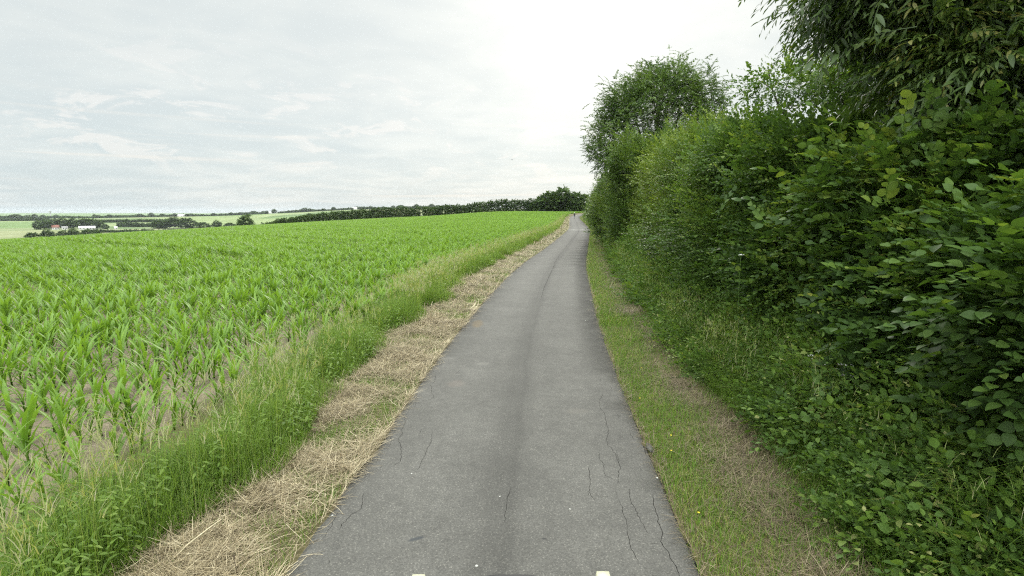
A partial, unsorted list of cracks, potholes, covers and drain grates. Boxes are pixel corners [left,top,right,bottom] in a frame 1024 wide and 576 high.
crack [588,397,680,576]
